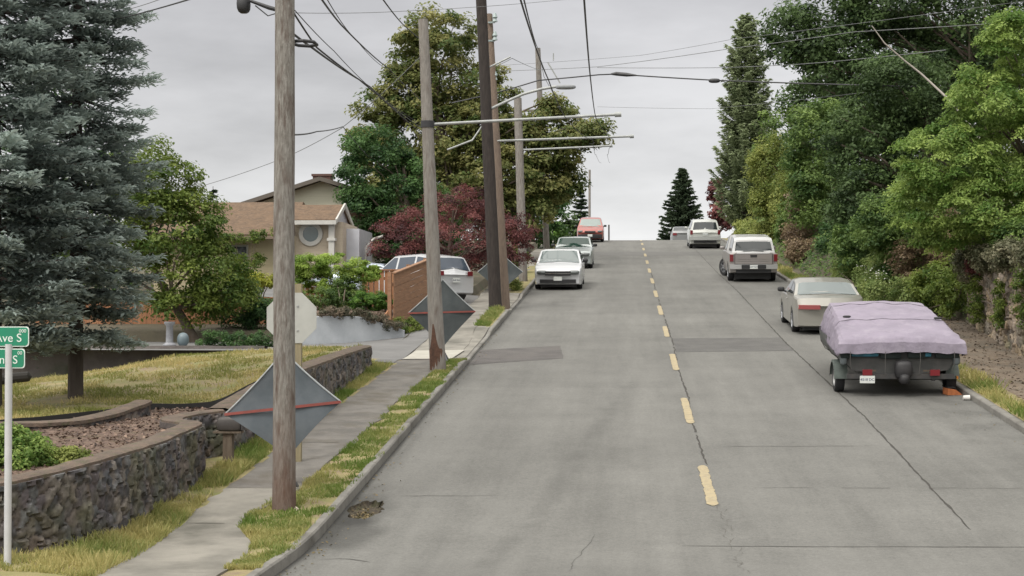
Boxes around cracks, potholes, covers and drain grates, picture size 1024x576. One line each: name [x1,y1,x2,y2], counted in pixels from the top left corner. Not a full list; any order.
crack [696,250,971,530]
pothole [347,500,385,519]
